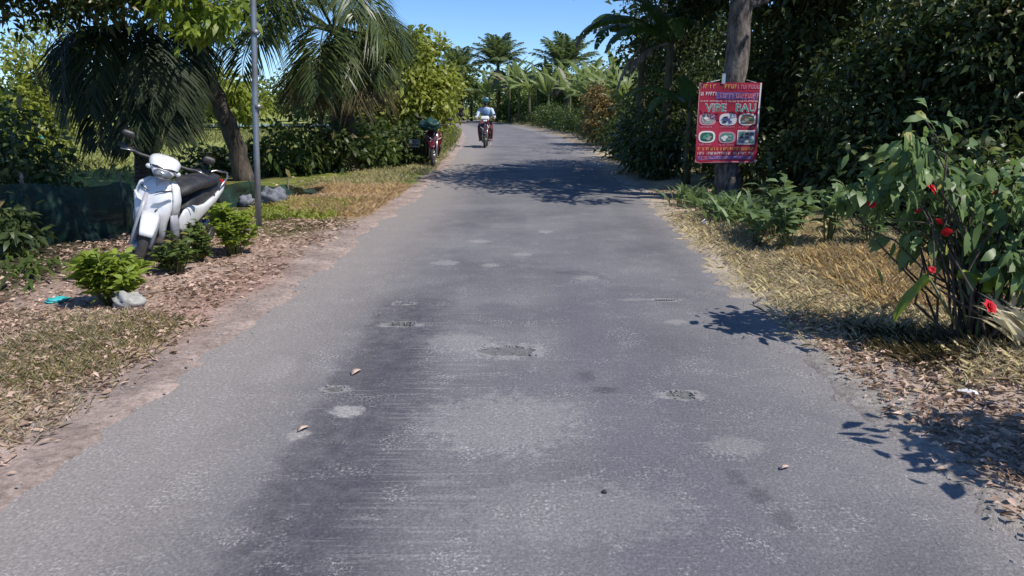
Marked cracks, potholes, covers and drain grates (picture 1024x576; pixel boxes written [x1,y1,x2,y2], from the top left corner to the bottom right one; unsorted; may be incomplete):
pothole [475,343,542,358]
pothole [660,389,698,400]
